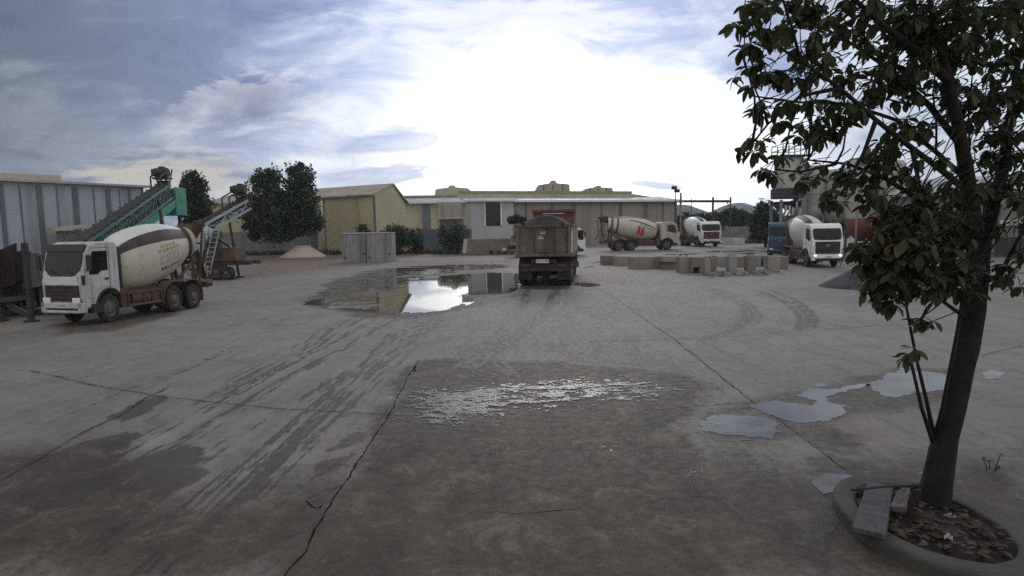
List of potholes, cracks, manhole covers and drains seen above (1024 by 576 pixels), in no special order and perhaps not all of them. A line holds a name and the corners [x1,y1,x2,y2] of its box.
crack [484,496,701,514]
